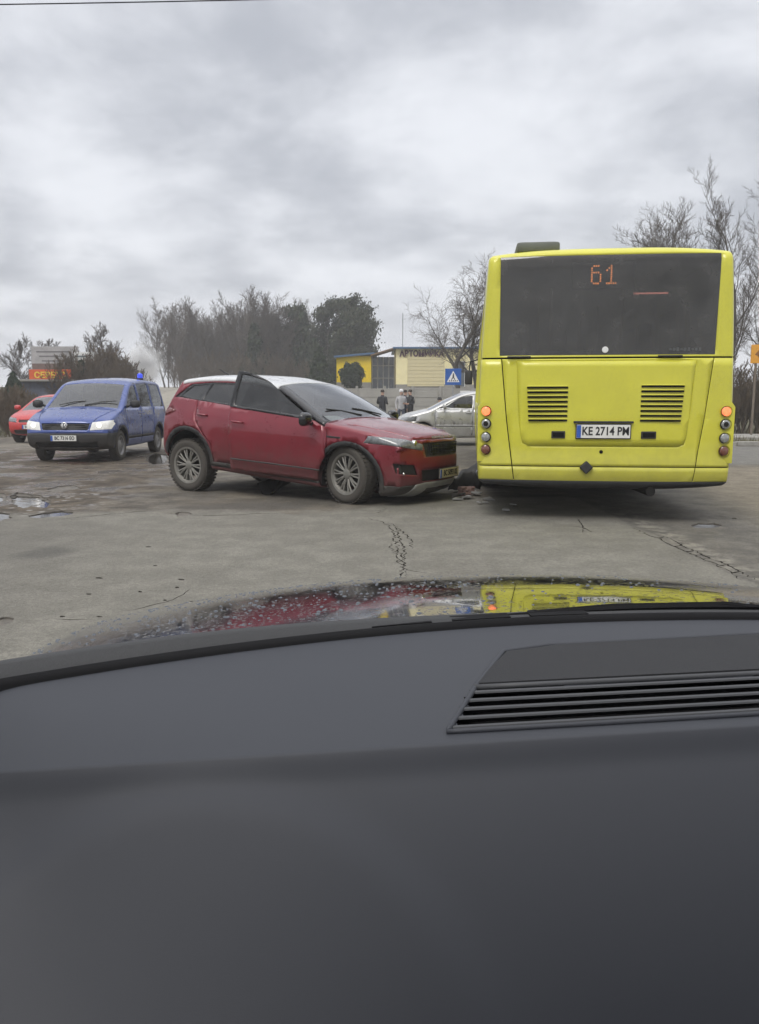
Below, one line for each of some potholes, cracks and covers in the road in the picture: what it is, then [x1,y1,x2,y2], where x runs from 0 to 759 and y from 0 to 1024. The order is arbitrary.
crack [62,589,190,620]
crack [636,529,755,579]
pothole [145,453,168,464]
pothole [9,492,51,509]
crack [354,510,426,577]
